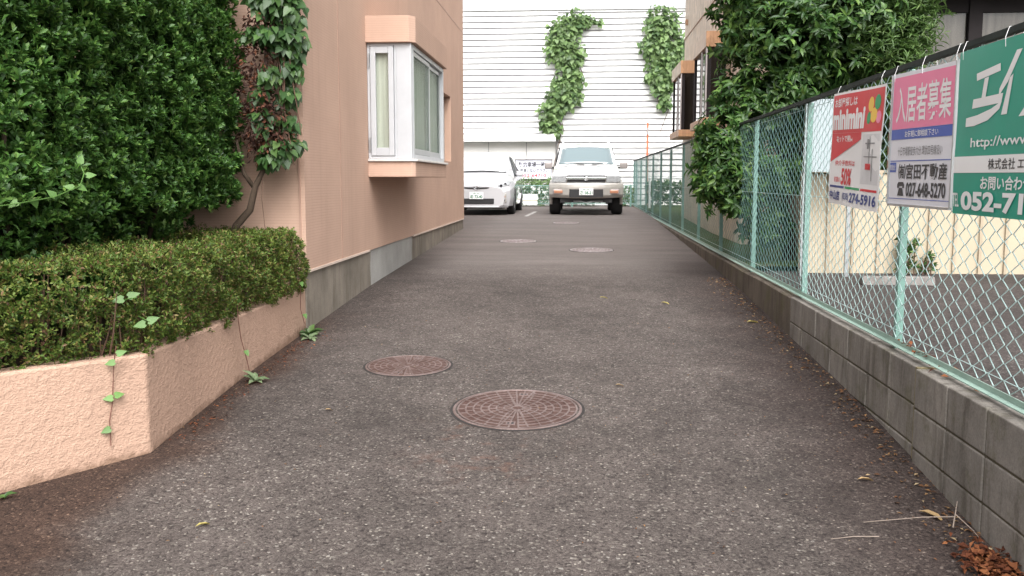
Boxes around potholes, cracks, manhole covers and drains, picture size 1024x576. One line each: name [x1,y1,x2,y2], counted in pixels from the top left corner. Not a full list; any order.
manhole cover [450,389,585,431]
manhole cover [363,355,453,377]
